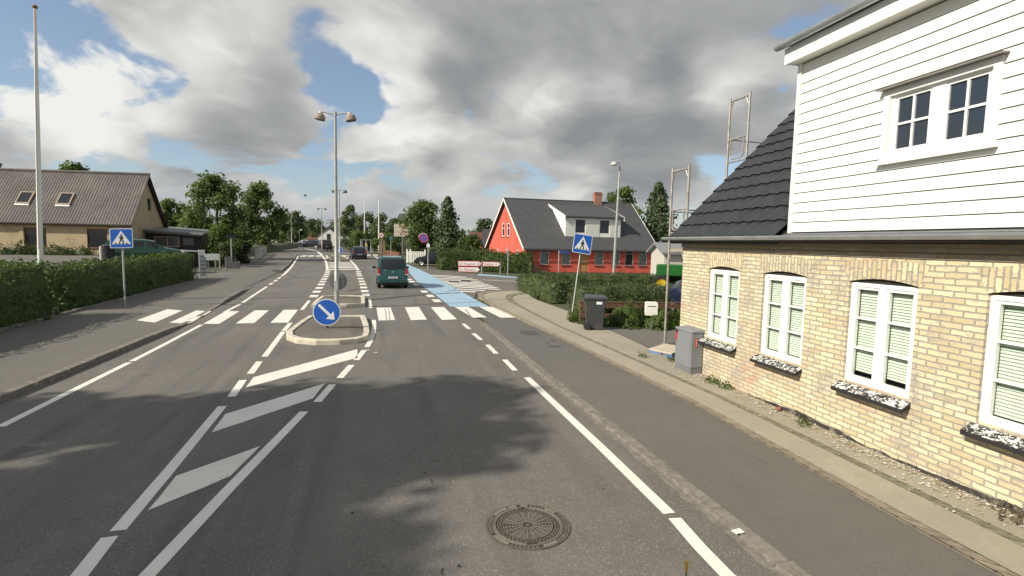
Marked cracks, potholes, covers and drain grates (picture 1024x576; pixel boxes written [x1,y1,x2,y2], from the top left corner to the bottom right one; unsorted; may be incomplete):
manhole cover [486,504,570,550]
